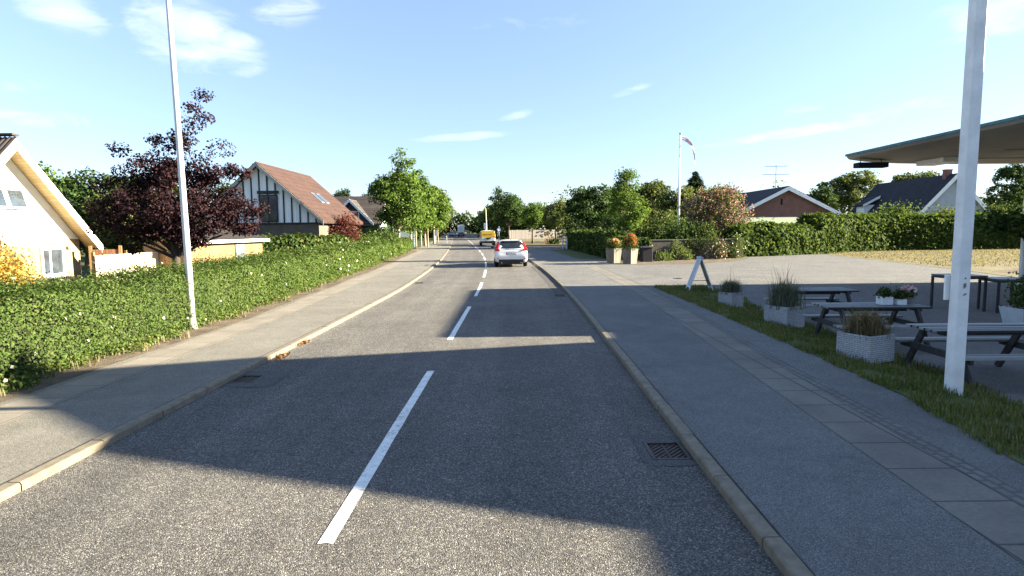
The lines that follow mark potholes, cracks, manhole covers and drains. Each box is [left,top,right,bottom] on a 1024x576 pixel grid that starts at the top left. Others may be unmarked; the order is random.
drain grate [228,375,265,383]
drain grate [642,441,693,460]
